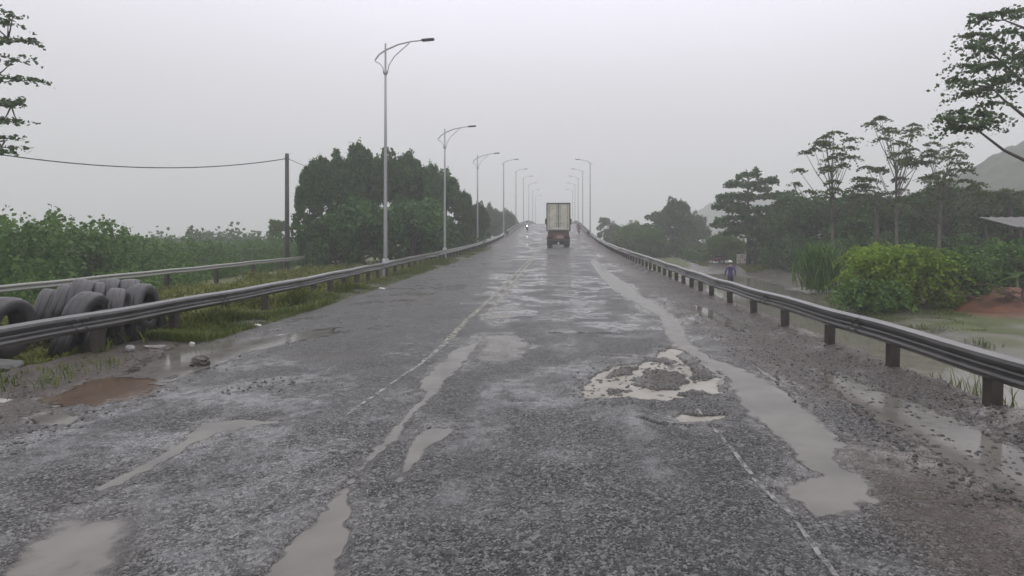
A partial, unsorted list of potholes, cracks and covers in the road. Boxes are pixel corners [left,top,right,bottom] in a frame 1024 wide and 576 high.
pothole [572,346,735,402]
pothole [33,372,180,409]
pothole [669,410,736,424]
pothole [388,424,460,486]
